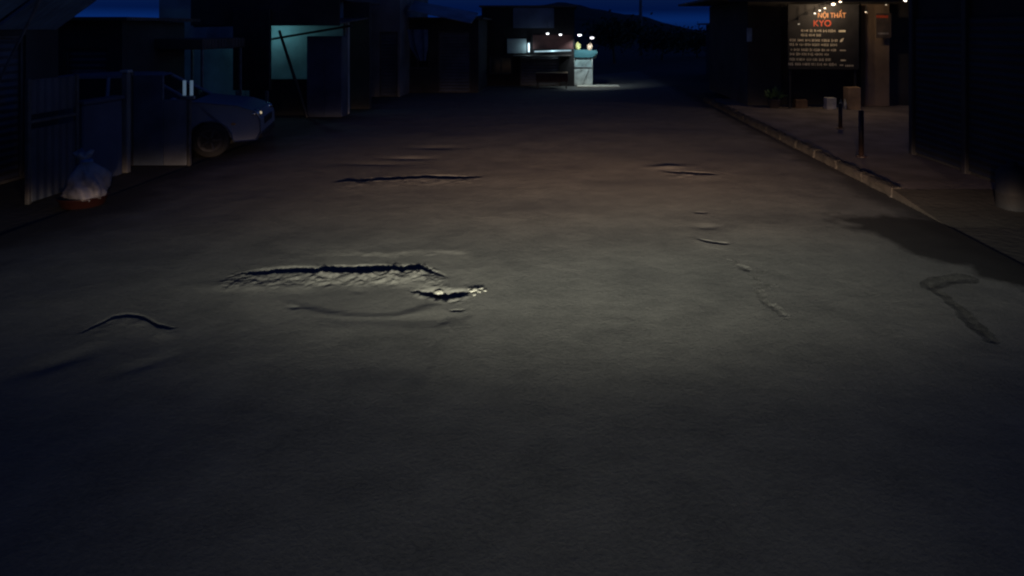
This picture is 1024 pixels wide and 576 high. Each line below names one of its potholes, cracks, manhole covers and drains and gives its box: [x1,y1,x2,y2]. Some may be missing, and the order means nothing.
crack [722,258,794,320]
crack [918,273,1000,344]
pothole [408,285,473,305]
